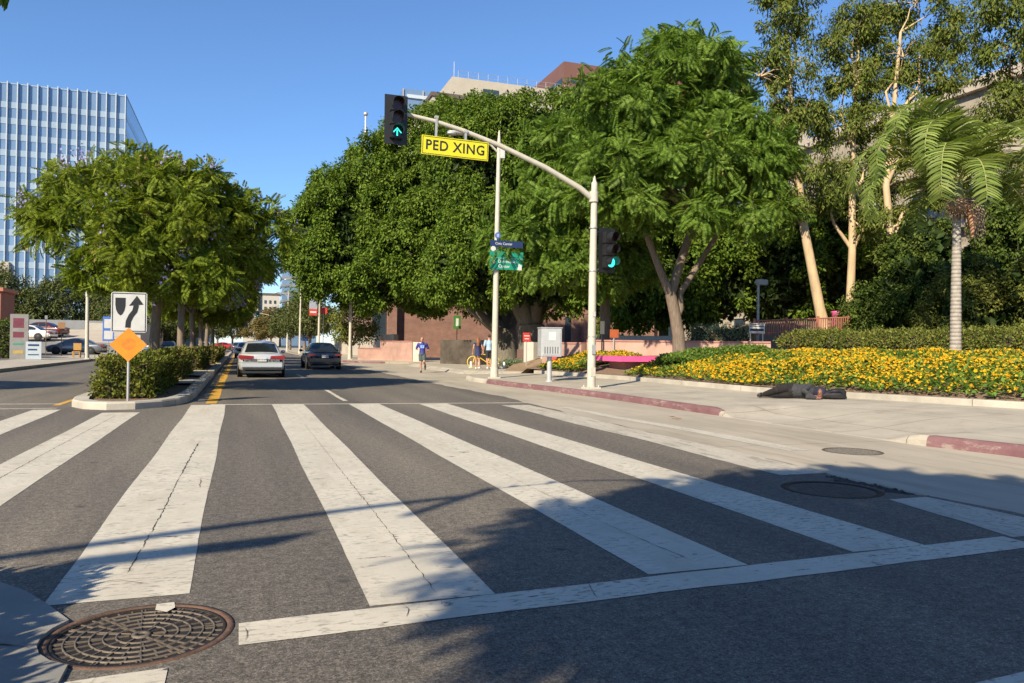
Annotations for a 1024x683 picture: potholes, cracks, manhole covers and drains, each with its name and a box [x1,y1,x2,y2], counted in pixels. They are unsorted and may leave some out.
manhole cover [781,481,884,499]
manhole cover [38,604,235,670]
crack [114,444,209,584]
manhole cover [822,447,884,455]
